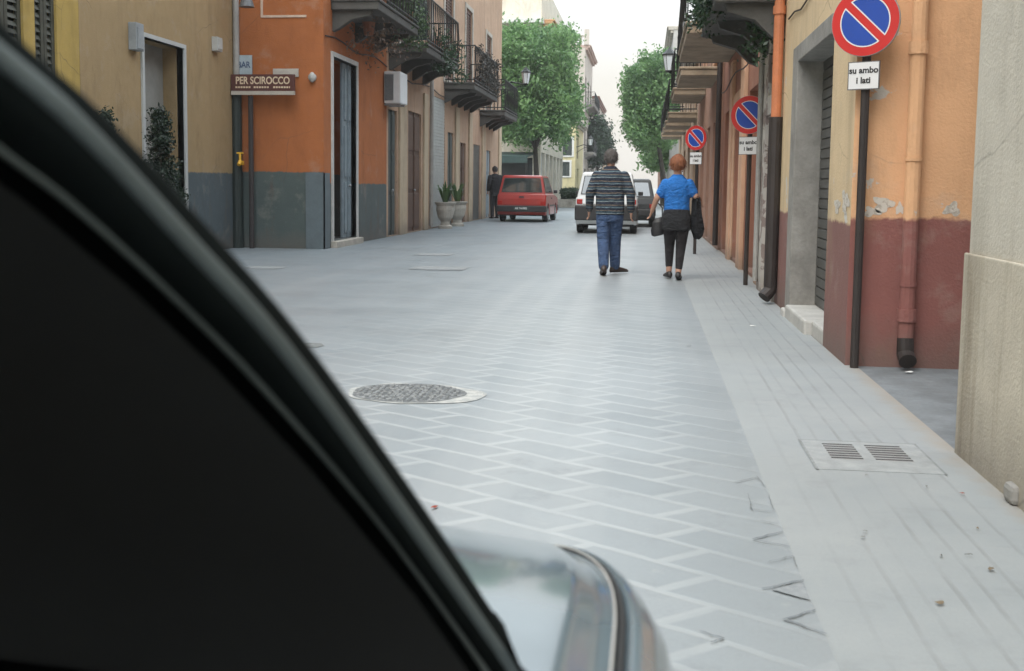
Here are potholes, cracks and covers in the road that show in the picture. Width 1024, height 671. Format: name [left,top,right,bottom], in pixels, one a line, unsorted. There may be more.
crack [736,476,825,633]
manhole cover [349,383,487,403]
drain grate [798,439,948,475]
